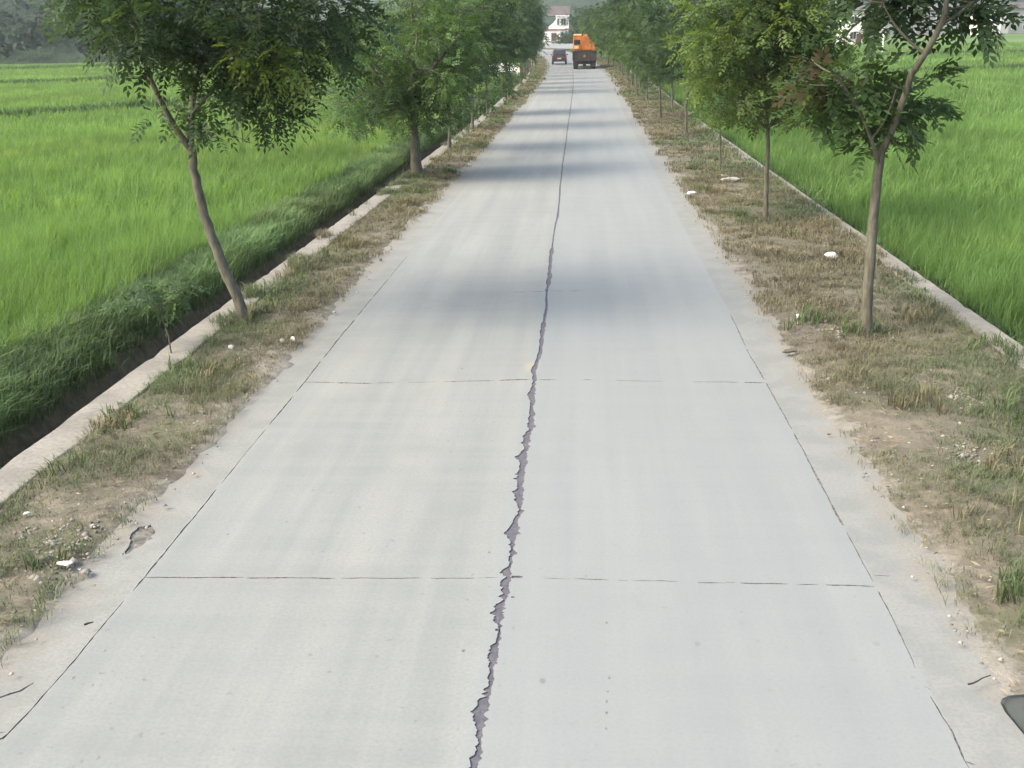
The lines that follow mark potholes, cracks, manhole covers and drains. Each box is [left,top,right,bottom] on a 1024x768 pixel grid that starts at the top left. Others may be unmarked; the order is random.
pothole [125,525,155,554]
crack [469,79,574,768]
